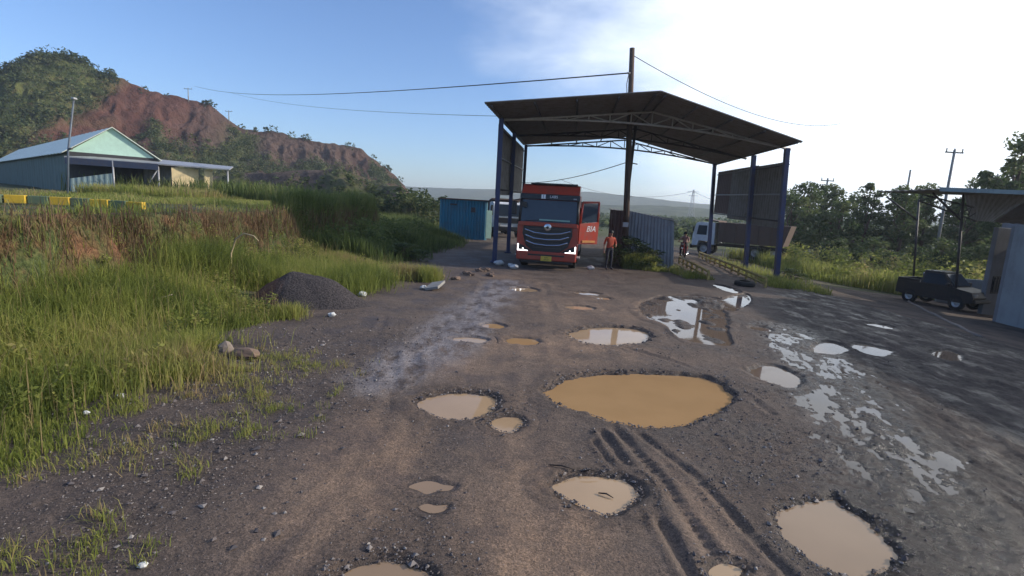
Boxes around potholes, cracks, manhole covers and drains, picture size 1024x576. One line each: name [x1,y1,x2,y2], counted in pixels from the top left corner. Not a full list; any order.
pothole [731,478,957,576]
pothole [730,359,824,394]
pothole [475,409,539,439]
pothole [395,472,468,498]
pothole [627,293,742,350]
pothole [520,458,677,534]
pothole [472,320,515,330]
pothole [407,497,459,519]
pothole [389,382,523,430]
pothole [495,334,553,348]
pothole [522,365,756,438]
